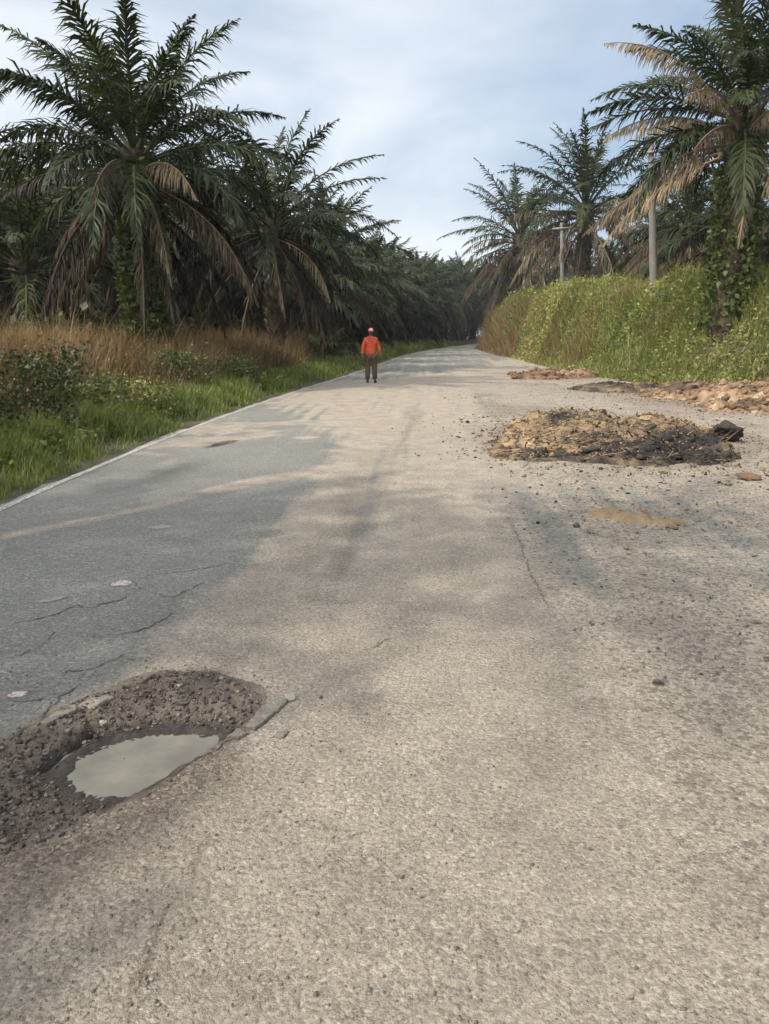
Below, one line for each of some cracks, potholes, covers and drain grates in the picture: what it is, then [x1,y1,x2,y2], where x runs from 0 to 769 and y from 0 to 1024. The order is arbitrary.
crack [15,552,225,657]
pothole [0,670,267,853]
crack [0,654,125,750]
